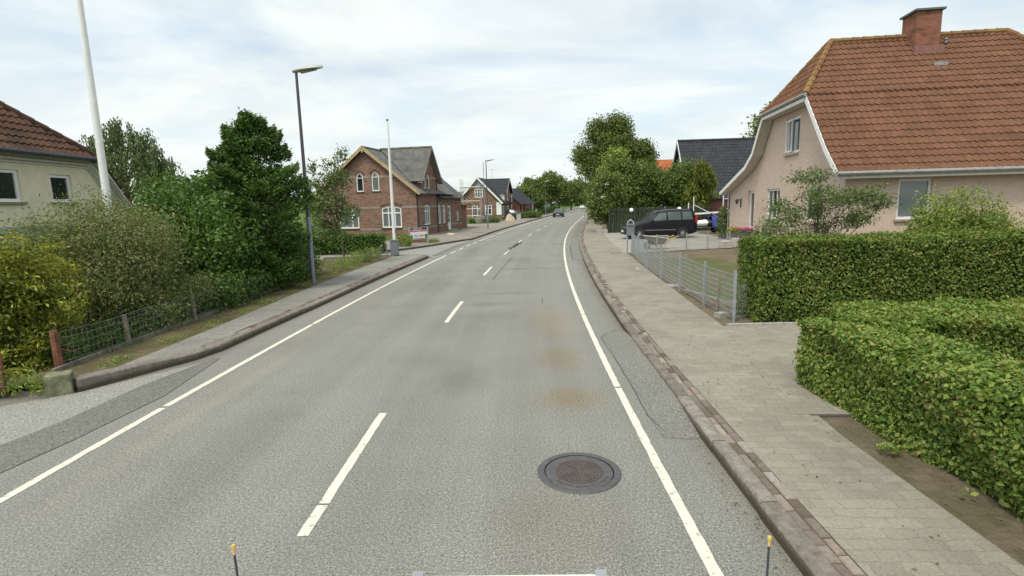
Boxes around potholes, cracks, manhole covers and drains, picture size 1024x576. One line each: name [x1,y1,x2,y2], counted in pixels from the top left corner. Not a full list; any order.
manhole cover [537,452,621,494]
